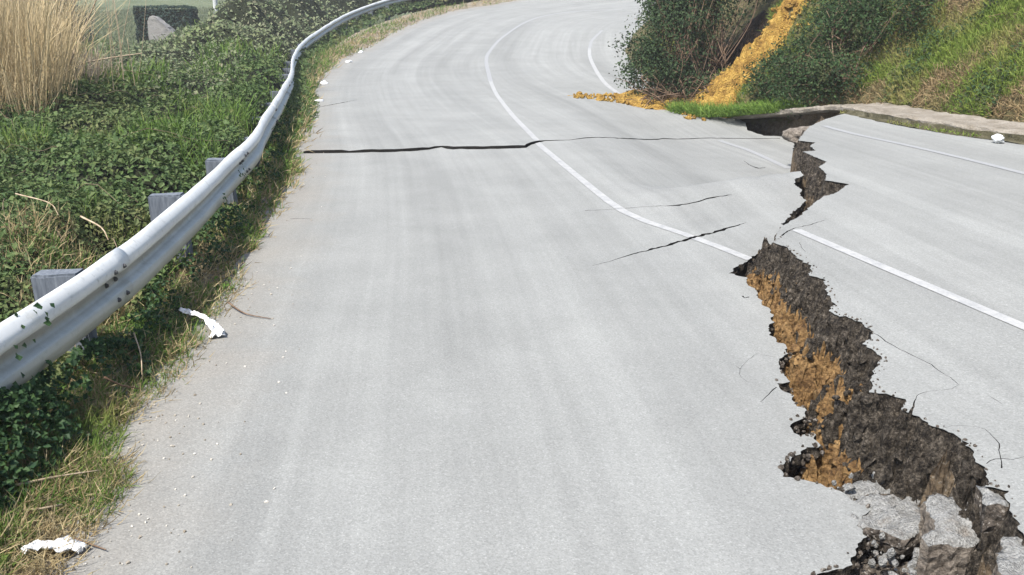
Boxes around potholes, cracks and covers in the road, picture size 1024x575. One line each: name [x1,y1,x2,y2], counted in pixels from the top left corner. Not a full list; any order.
crack [303,130,1024,575]
